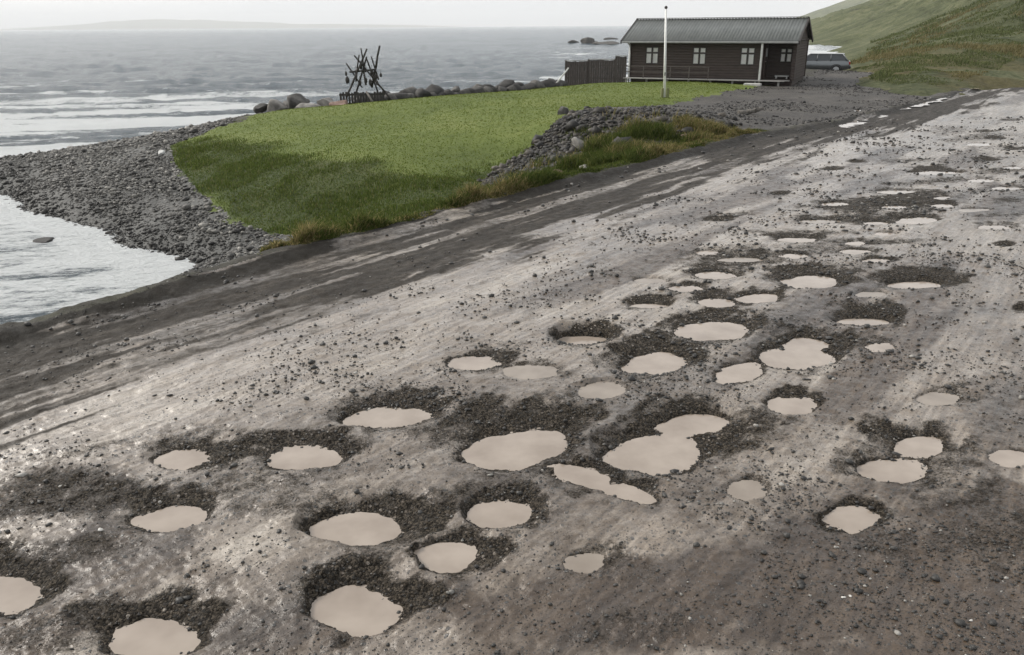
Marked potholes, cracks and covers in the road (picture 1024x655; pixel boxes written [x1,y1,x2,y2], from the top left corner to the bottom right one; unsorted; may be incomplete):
pothole [527,454,673,512]
pothole [0,540,77,623]
pothole [293,477,461,554]
pothole [745,324,860,376]
pothole [93,476,237,538]
pothole [140,427,239,476]
pothole [410,521,519,580]
pothole [415,389,614,477]
pothole [60,573,238,655]
pothole [233,425,368,475]
pothole [329,383,463,435]
